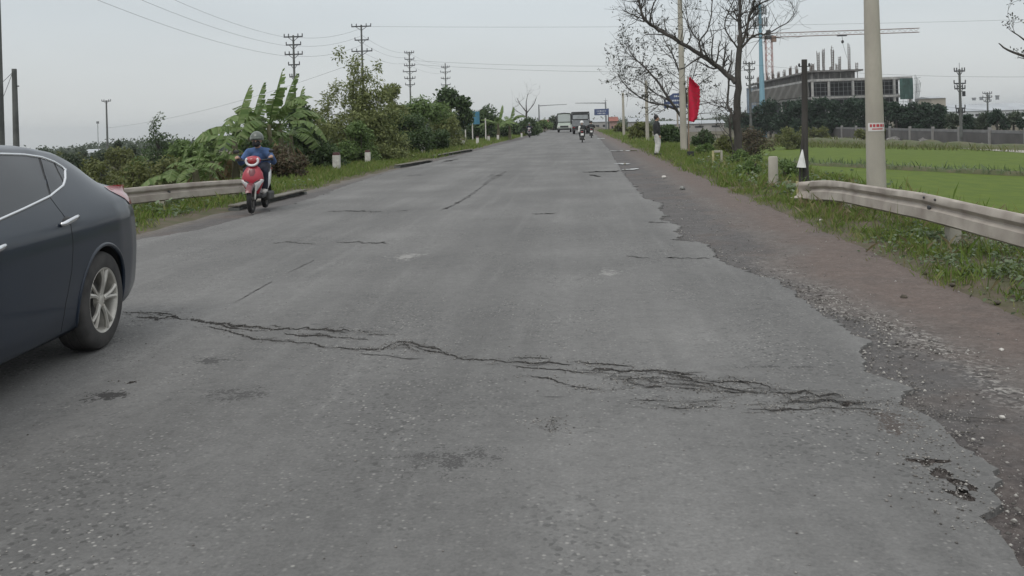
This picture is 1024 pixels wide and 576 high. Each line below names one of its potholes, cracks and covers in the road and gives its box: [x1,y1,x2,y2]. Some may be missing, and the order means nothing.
pothole [930,467,978,493]
crack [632,222,709,259]
crack [126,312,904,414]
pothole [944,488,976,501]
